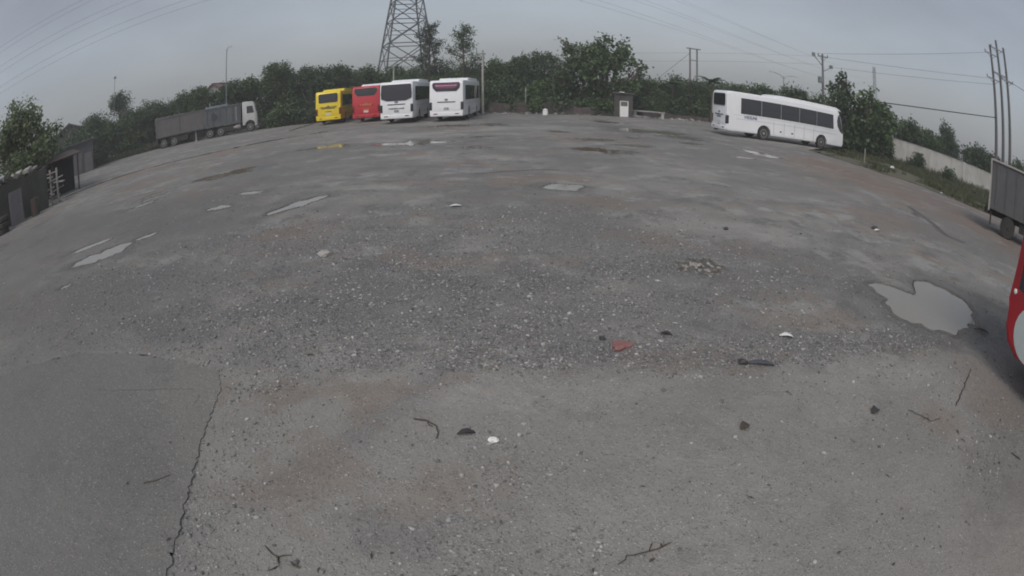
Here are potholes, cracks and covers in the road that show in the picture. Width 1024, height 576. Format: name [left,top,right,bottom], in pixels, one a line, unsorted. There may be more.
pothole [675,258,729,277]
pothole [861,279,981,340]
pothole [191,166,258,183]
pothole [569,147,641,155]
